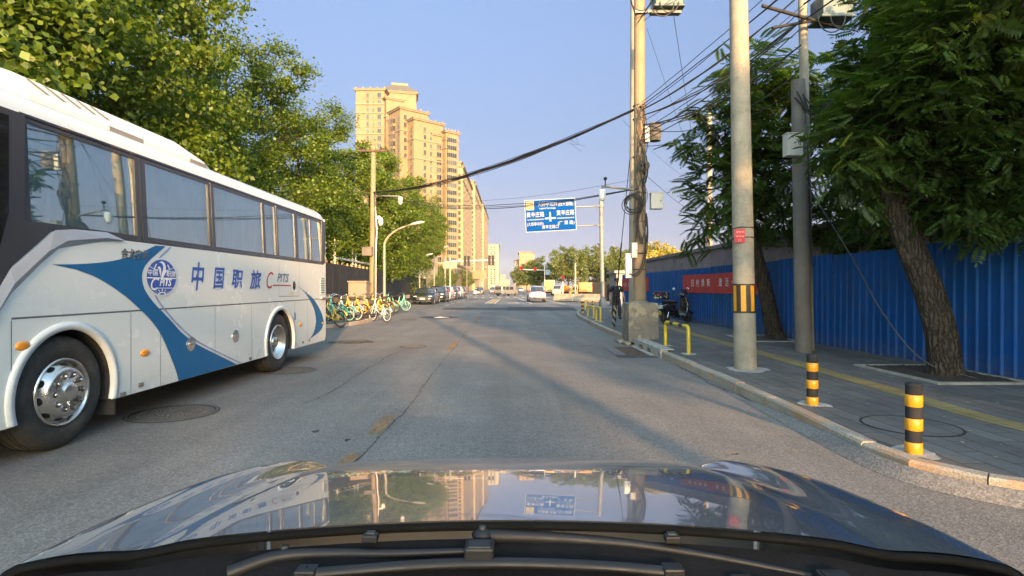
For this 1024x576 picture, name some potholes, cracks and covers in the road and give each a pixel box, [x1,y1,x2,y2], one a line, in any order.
drain grate [615,345,654,355]
manhole cover [122,404,221,423]
crack [353,316,482,462]
manhole cover [859,415,967,437]
